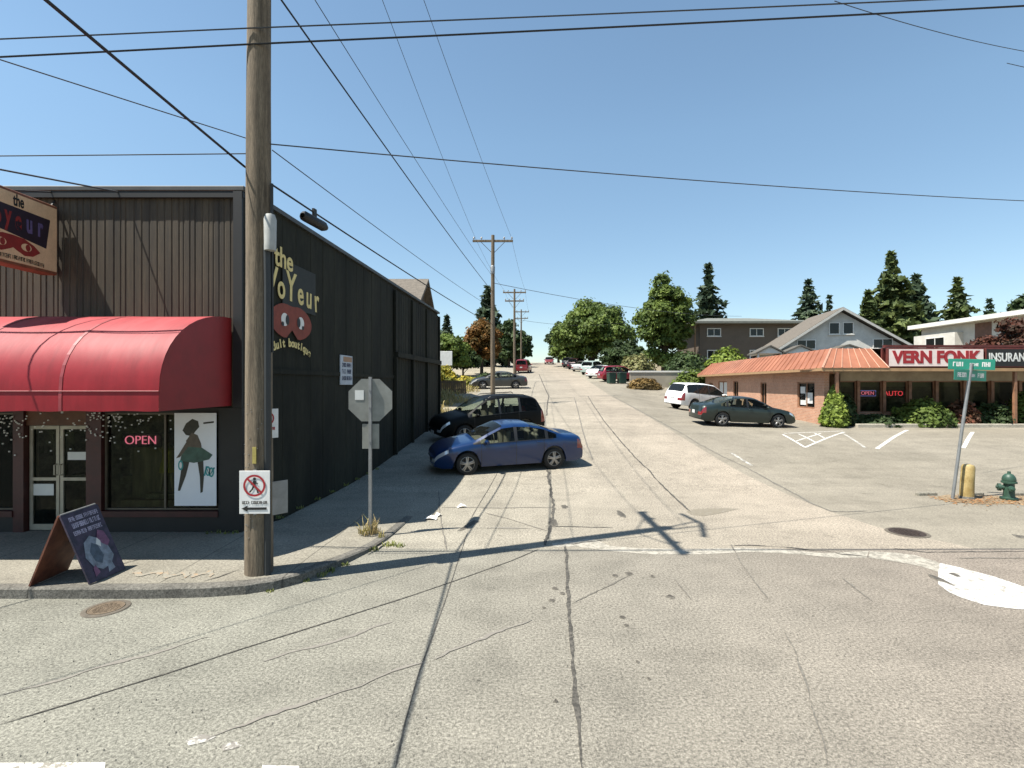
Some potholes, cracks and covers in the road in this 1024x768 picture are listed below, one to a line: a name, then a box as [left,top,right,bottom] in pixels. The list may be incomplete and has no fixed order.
crack [783,626,828,764]
manhole cover [80,600,132,618]
manhole cover [884,527,931,538]
crack [1,467,556,768]
